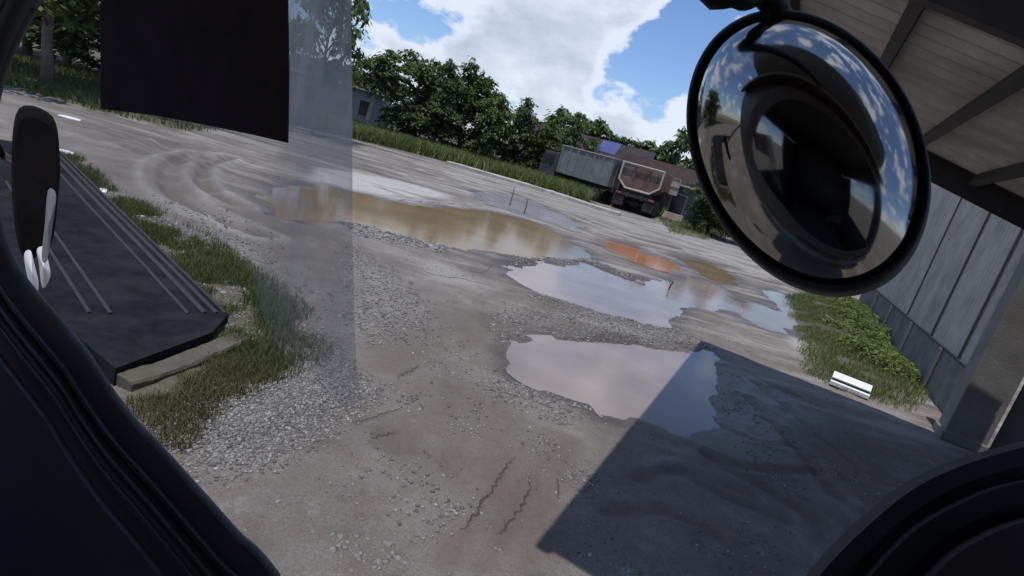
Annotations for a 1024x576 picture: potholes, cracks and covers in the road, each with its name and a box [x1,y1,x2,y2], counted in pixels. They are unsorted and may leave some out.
pothole [500,261,743,328]
pothole [250,184,591,262]
pothole [497,335,735,446]
pothole [598,240,680,273]
